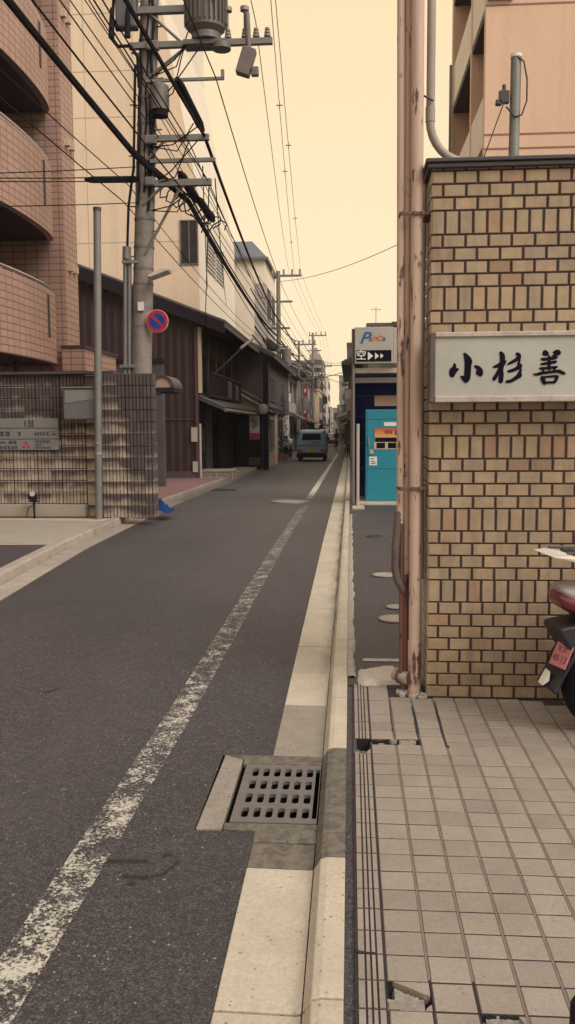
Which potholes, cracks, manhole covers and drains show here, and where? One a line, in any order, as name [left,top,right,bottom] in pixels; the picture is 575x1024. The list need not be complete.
drain grate [196,755,323,853]
manhole cover [378,614,399,623]
pothole [480,1015,528,1024]
crack [412,701,450,747]
pothole [354,739,371,754]
pothole [386,981,434,1012]
